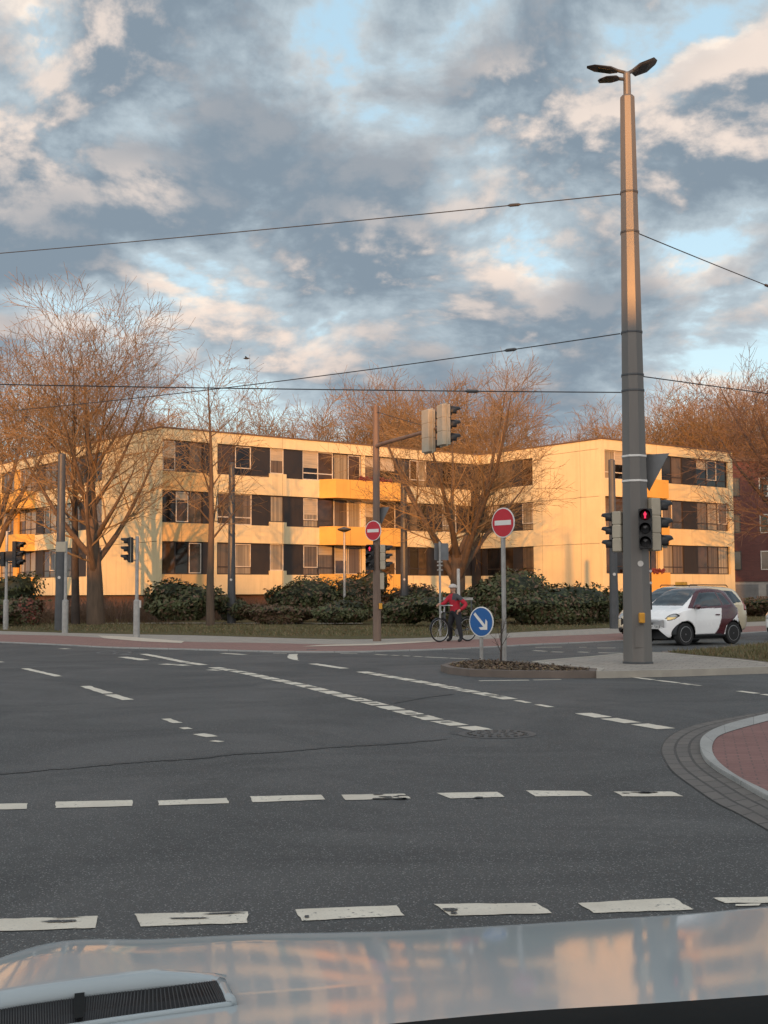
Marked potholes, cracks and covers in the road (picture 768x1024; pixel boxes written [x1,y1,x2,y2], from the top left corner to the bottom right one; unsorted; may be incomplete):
manhole cover [458,729,536,738]
